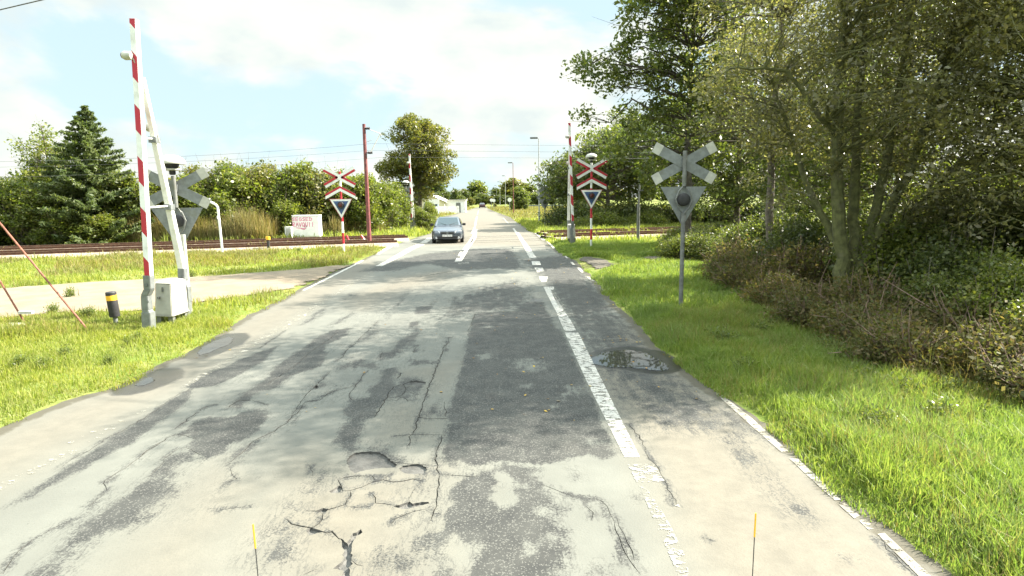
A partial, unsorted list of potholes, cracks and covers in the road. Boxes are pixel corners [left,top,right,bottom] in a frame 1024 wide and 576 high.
crack [541,484,641,575]
crack [287,434,477,575]
pothole [347,451,397,473]
crack [223,322,415,486]
pothole [399,464,427,474]
